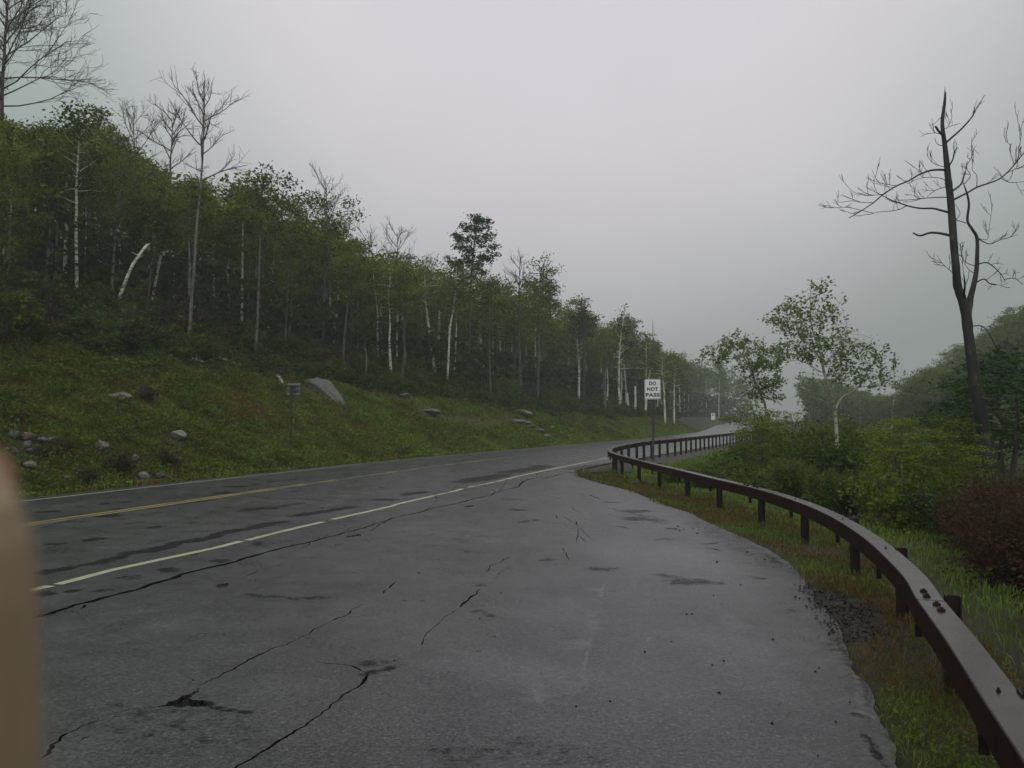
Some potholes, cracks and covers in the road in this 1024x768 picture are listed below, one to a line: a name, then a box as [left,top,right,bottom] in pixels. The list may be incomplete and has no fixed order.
pothole [157,688,208,708]
crack [555,495,618,561]
crack [421,557,510,645]
crack [45,604,369,768]
